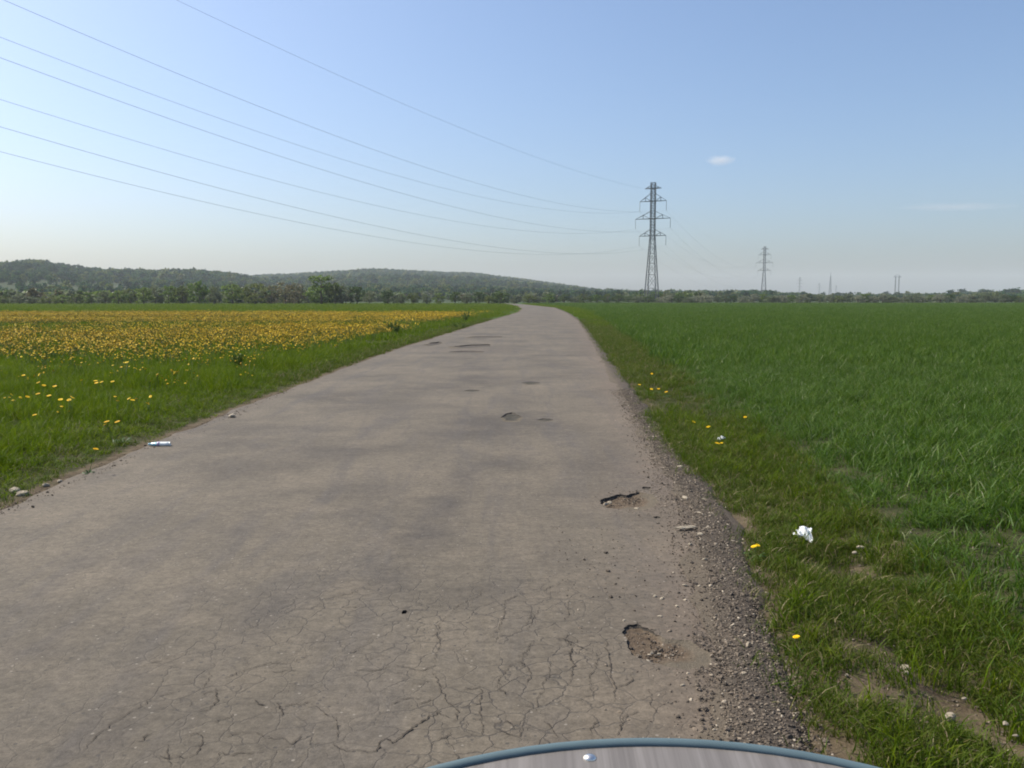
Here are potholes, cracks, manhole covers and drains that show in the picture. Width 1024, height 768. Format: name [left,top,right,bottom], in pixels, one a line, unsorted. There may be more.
pothole [622,624,713,670]
crack [546,581,657,734]
crack [132,662,301,765]
pothole [501,412,523,422]
crack [255,590,557,759]
pothole [600,492,659,510]
